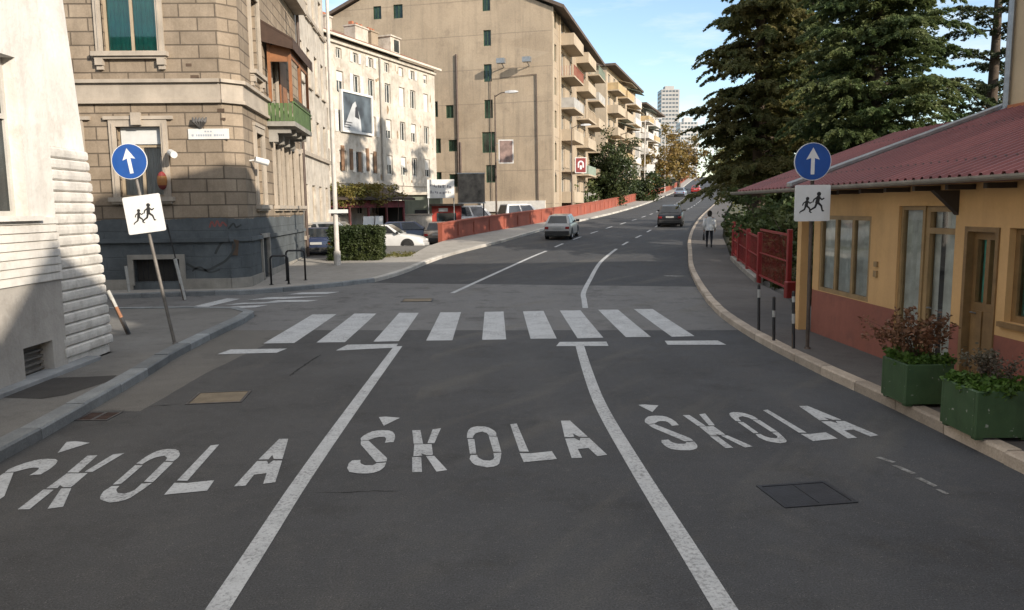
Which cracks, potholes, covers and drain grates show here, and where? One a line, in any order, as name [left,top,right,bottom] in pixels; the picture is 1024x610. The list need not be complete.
manhole cover [185,390,252,405]
manhole cover [756,481,858,508]
drain grate [74,412,123,421]
